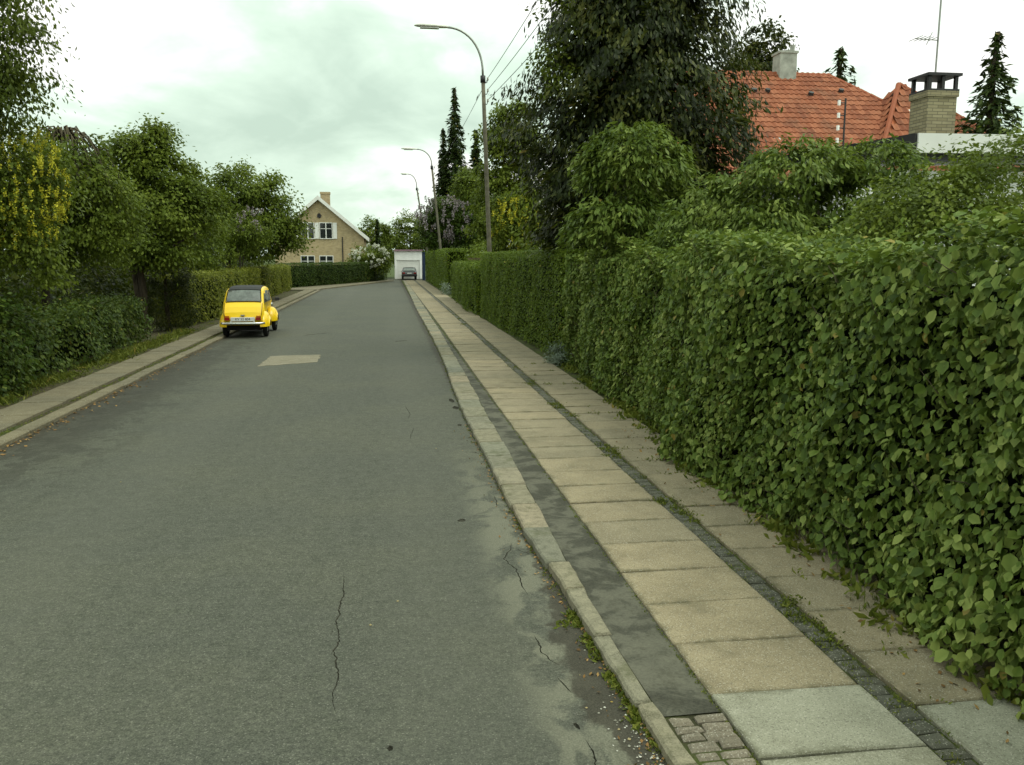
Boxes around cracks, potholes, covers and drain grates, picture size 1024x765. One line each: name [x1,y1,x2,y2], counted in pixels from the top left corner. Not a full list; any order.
crack [503,549,529,593]
crack [535,637,570,691]
crack [332,583,350,712]
